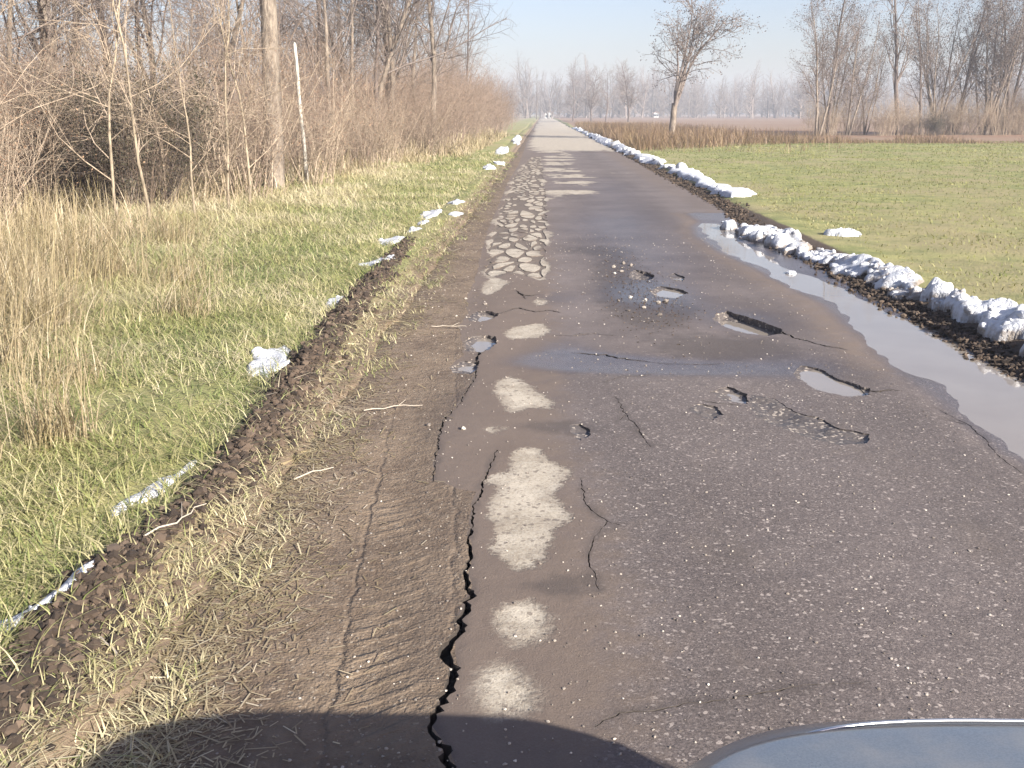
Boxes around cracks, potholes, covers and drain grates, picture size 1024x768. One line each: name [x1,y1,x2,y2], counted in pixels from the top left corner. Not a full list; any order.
pothole [569,424,591,441]
crack [940,410,1020,472]
pothole [689,404,724,420]
crack [581,353,725,447]
pothole [710,386,749,404]
pothole [650,286,688,298]
pothole [794,365,870,395]
crack [581,480,619,589]
crack [485,152,607,314]
pothole [713,311,782,334]
crack [427,450,498,768]
